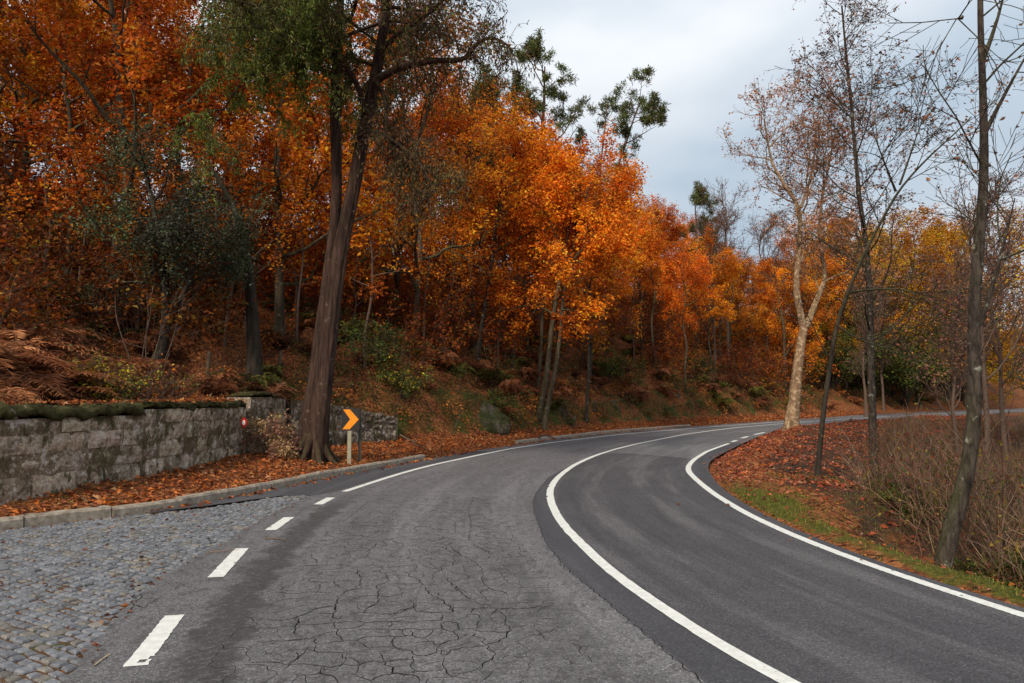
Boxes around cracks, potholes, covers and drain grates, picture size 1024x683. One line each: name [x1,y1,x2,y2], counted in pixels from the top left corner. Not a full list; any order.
crack [197,496,592,683]
